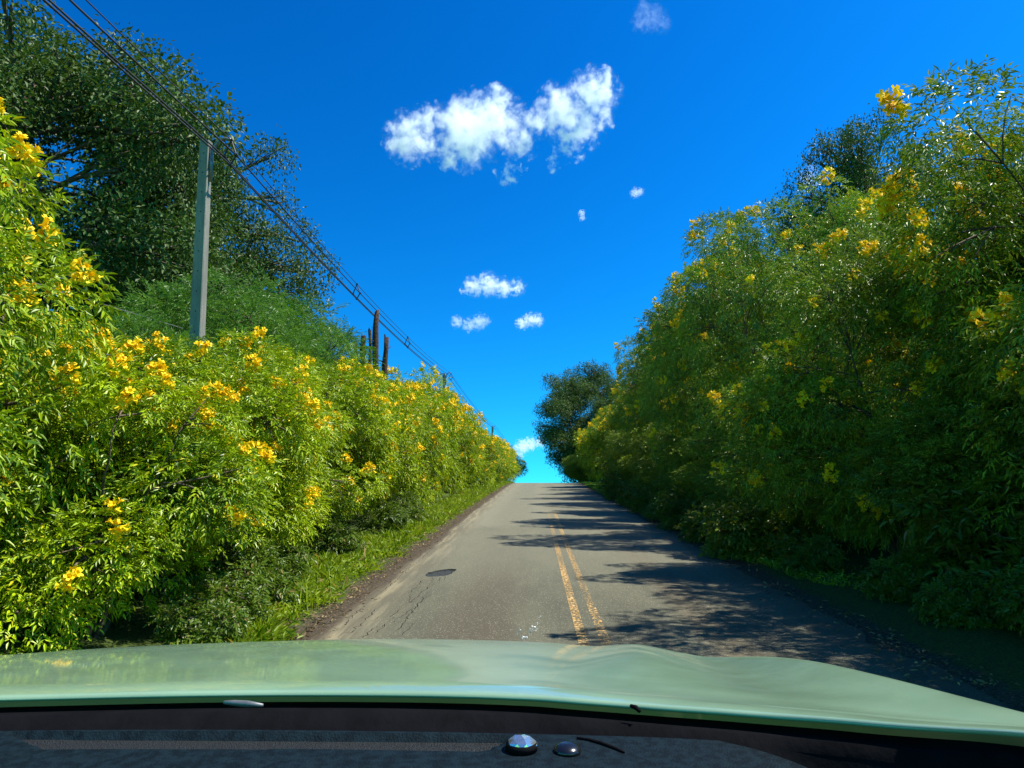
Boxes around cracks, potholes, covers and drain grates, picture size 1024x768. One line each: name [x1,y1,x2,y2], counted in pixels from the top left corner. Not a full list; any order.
crack [338,554,446,638]
pothole [425,569,456,577]
